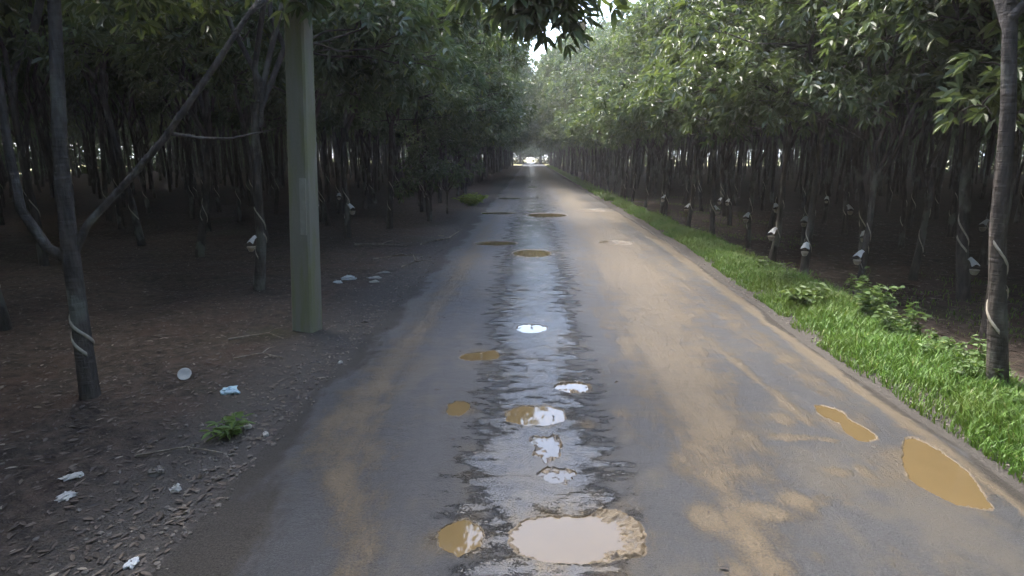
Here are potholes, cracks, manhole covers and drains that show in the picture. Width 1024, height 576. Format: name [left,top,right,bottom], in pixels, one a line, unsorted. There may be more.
pothole [529,433,563,464]
pothole [446,400,471,416]
pothole [814,404,879,442]
pothole [507,507,647,565]
pothole [512,249,552,257]
pothole [901,436,995,511]
pothole [554,381,593,393]
pothole [504,405,566,426]
pothole [516,323,548,333]
pothole [458,350,500,361]
pothole [436,517,485,557]
pothole [536,466,577,485]
